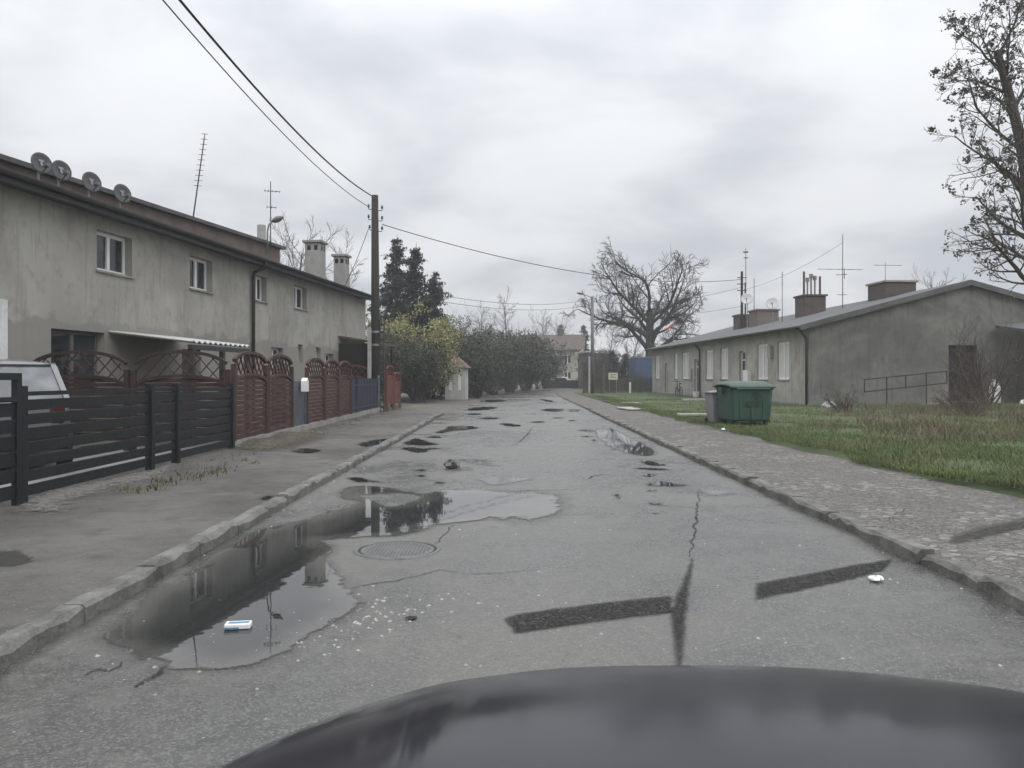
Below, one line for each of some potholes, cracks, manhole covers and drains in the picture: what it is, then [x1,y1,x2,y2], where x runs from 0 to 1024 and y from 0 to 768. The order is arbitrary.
manhole cover [353,540,441,560]
crack [354,569,523,604]
crack [84,661,167,686]
crack [657,488,701,557]
pothole [360,439,387,447]
pothole [436,425,479,433]
